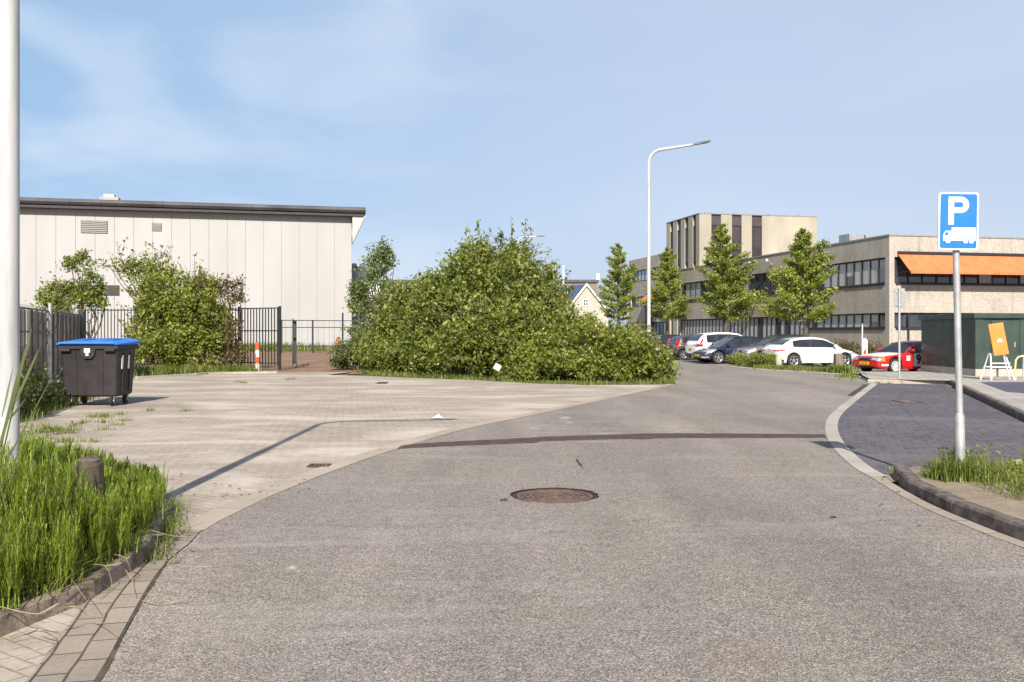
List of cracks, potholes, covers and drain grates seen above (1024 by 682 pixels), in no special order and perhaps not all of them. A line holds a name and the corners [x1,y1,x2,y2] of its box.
manhole cover [510,487,602,504]
